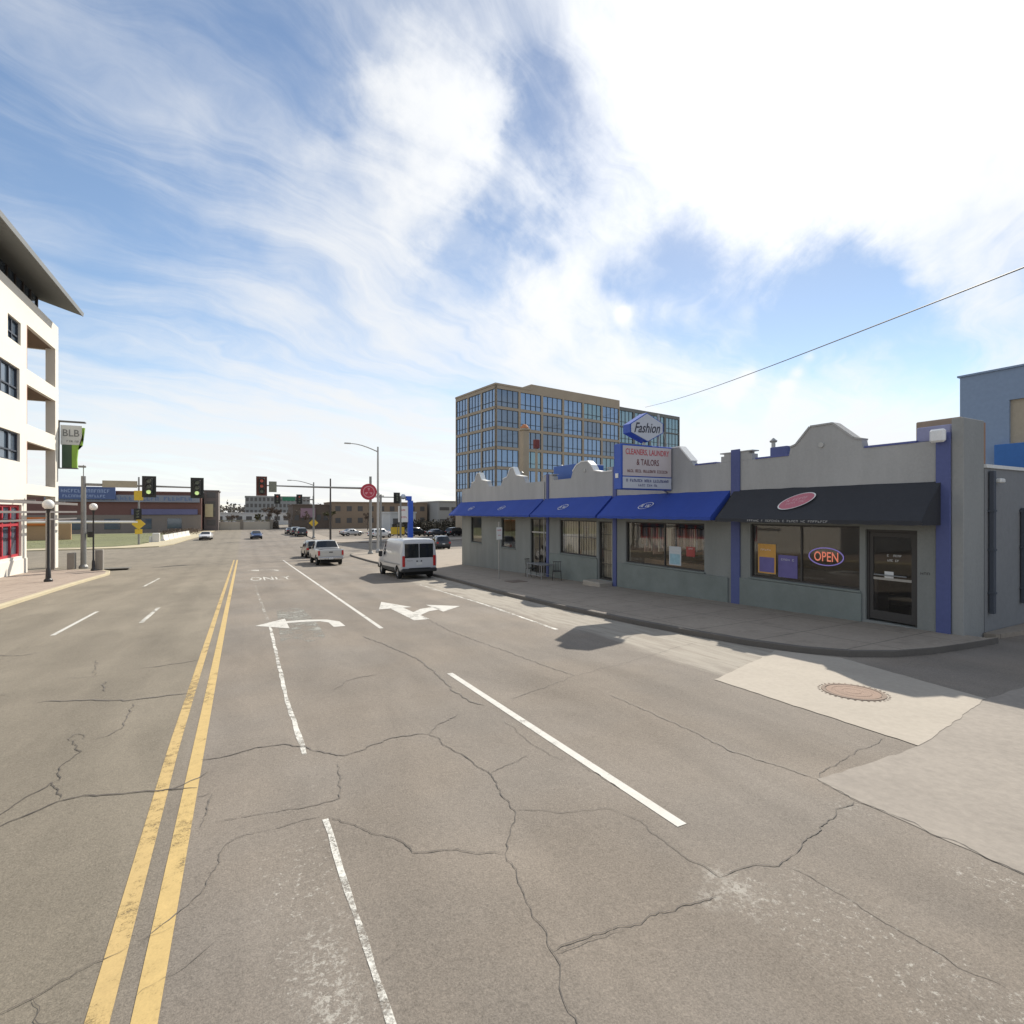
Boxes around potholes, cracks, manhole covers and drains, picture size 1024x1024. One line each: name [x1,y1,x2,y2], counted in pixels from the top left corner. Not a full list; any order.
crack [208,716,1008,1024]
crack [42,661,193,738]
crack [0,733,212,826]
manhole cover [817,683,891,702]
crack [1,816,319,1024]
crack [364,636,483,705]
